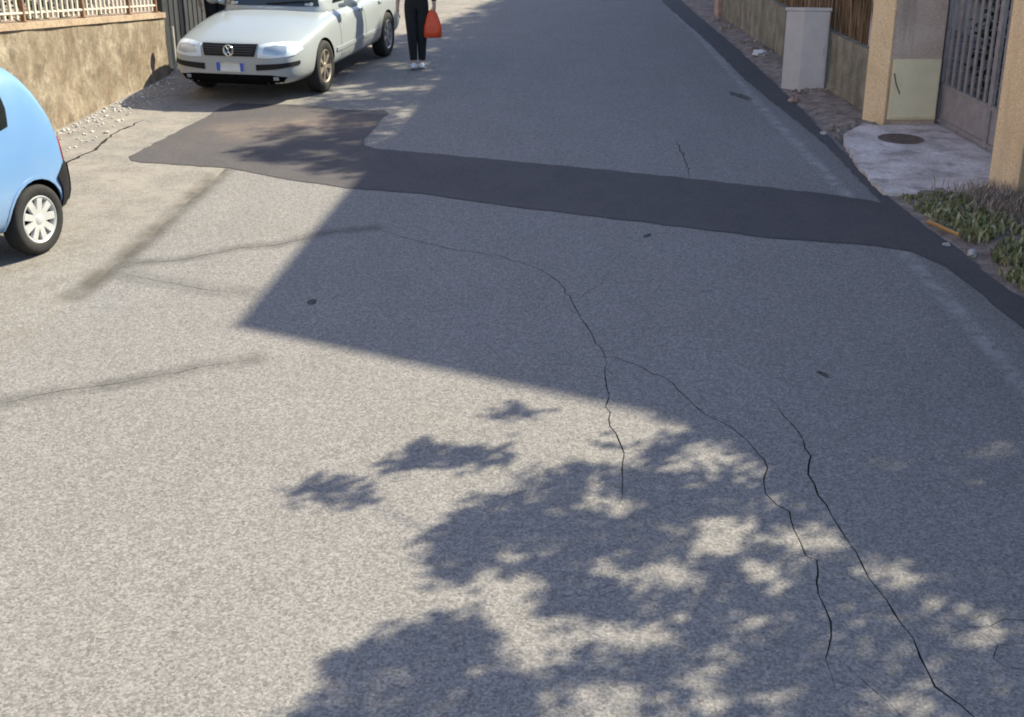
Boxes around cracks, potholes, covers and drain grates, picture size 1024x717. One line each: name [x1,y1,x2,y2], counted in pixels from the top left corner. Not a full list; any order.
manhole cover [878,133,925,144]
crack [375,228,1024,717]
crack [19,362,234,400]
crack [119,229,361,293]
crack [67,120,143,163]
